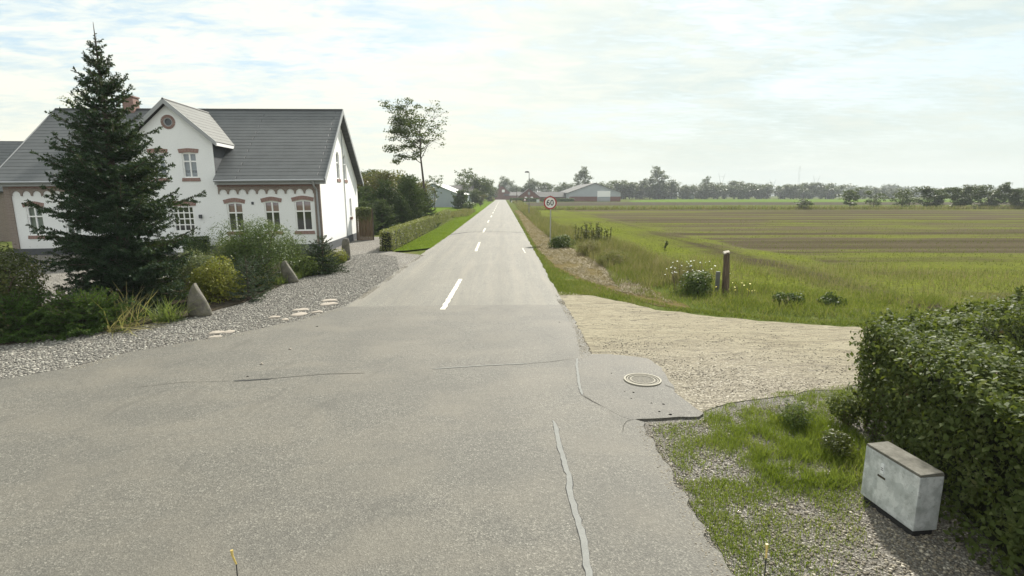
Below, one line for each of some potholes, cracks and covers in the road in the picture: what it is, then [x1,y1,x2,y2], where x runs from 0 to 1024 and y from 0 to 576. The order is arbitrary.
manhole cover [624,373,662,387]
